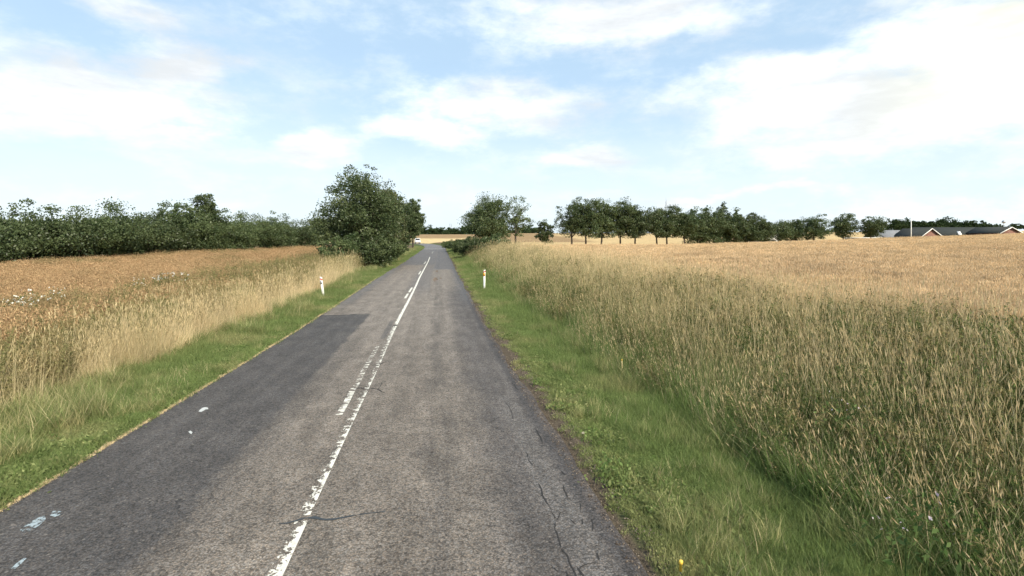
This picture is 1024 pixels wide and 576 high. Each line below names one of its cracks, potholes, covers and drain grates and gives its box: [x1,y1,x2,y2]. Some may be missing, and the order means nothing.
crack [478,383,601,576]
